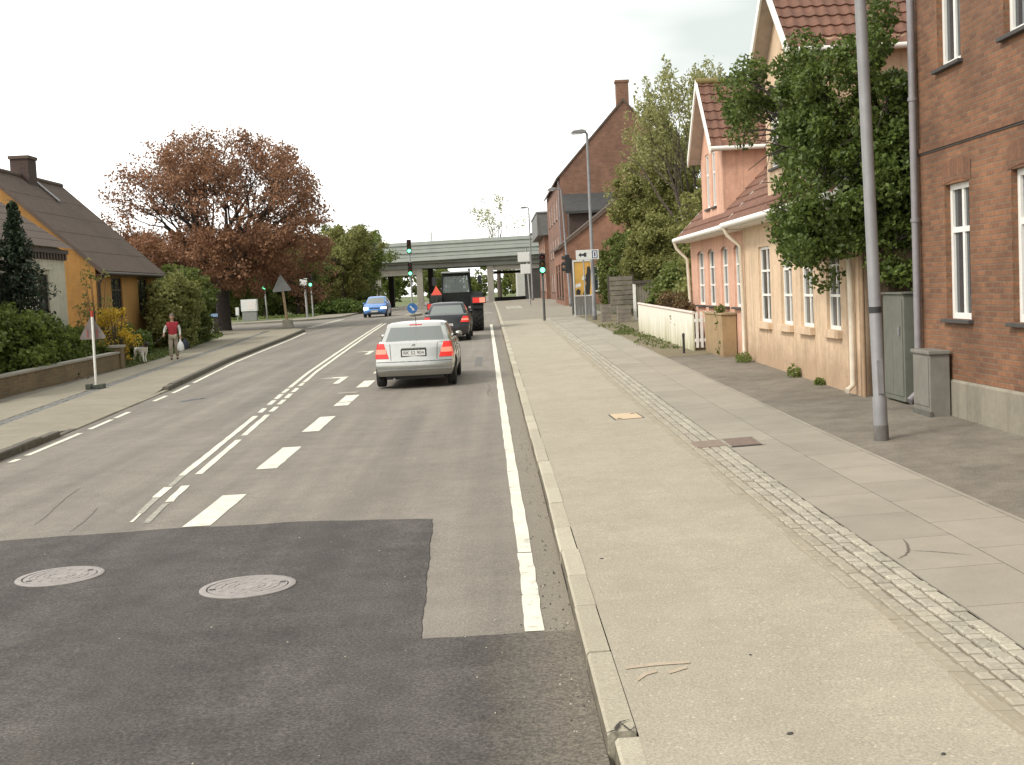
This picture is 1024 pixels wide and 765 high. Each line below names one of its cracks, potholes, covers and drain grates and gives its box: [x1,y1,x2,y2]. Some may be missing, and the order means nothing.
manhole cover [199,575,296,599]
utility cover [609,412,645,420]
manhole cover [14,566,105,587]
utility cover [691,436,765,450]
crack [34,489,97,532]
